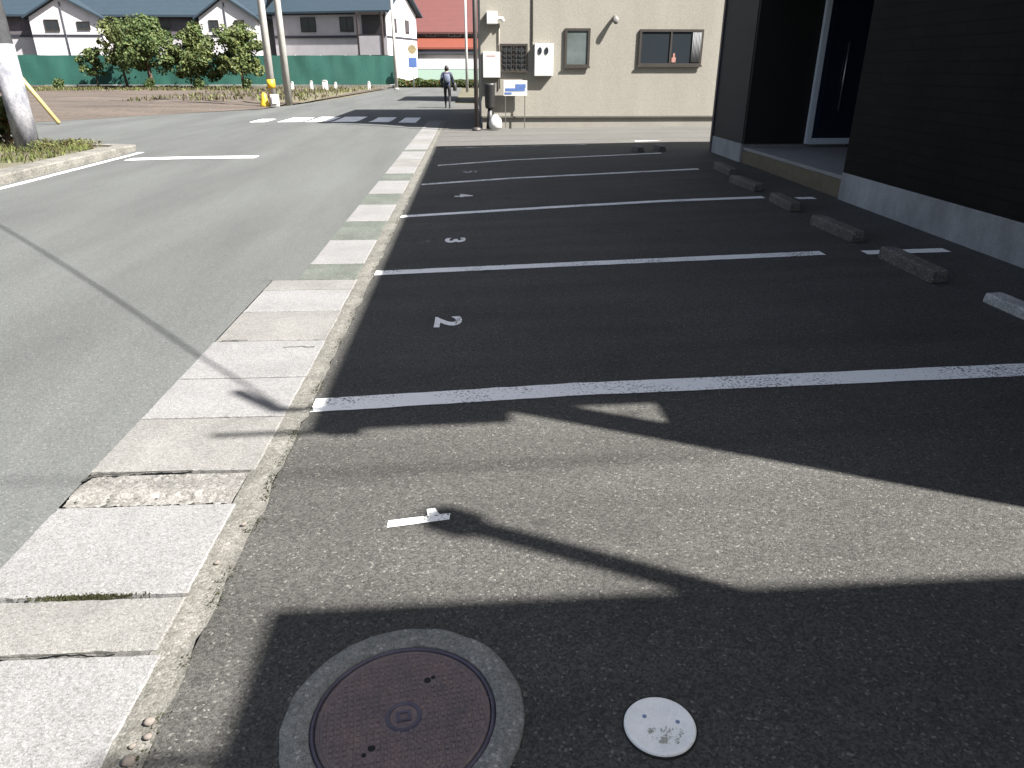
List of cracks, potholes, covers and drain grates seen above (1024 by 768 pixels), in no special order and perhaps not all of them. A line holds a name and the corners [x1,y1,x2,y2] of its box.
manhole cover [278,629,525,768]
